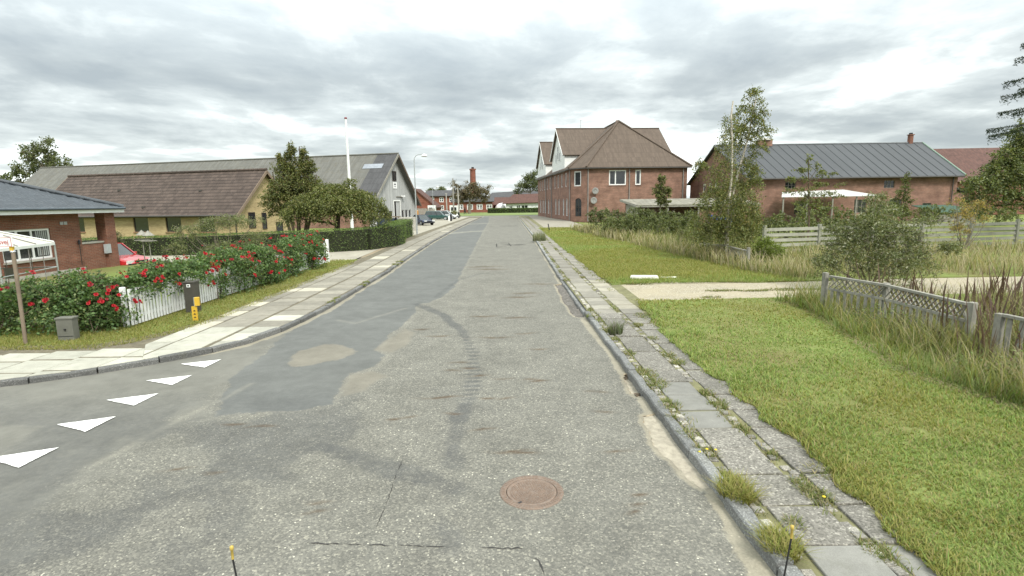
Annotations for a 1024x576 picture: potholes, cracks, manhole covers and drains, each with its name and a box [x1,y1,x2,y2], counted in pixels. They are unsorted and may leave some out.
manhole cover [500,475,564,510]
crack [314,542,544,573]
